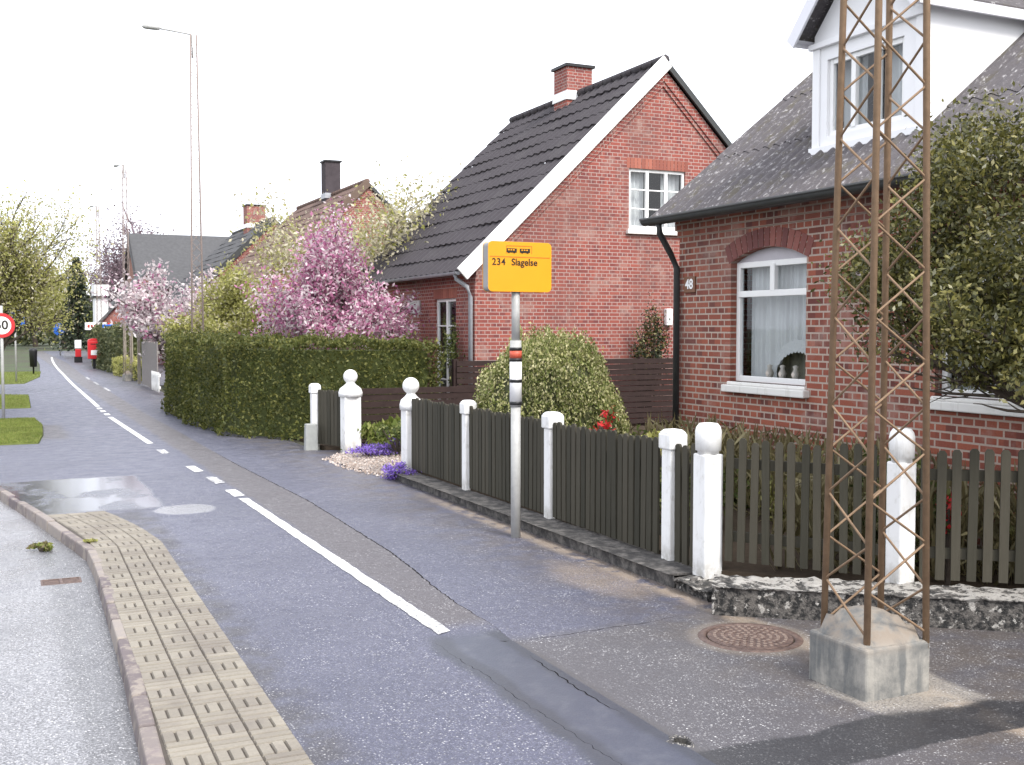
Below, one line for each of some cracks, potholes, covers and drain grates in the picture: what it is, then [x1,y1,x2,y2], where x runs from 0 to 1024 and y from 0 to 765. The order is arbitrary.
crack [444,649,622,765]
manhole cover [698,623,804,653]
drain grate [40,577,82,586]
